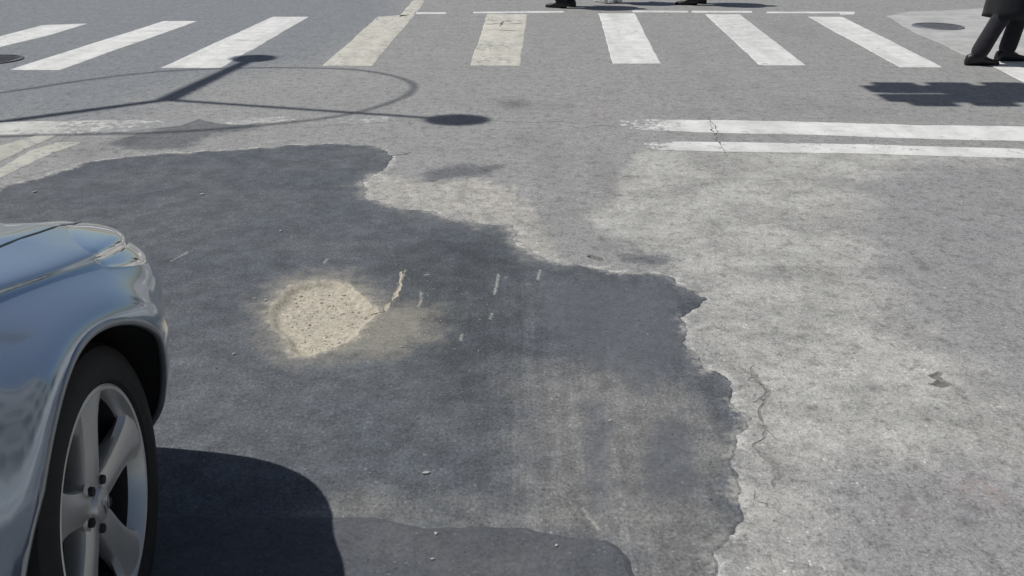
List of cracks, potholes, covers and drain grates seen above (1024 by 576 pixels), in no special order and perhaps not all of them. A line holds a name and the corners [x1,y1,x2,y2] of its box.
crack [372,269,404,315]
manhole cover [911,22,965,30]
crack [739,365,784,509]
manhole cover [0,54,25,64]
pothole [928,371,952,388]
